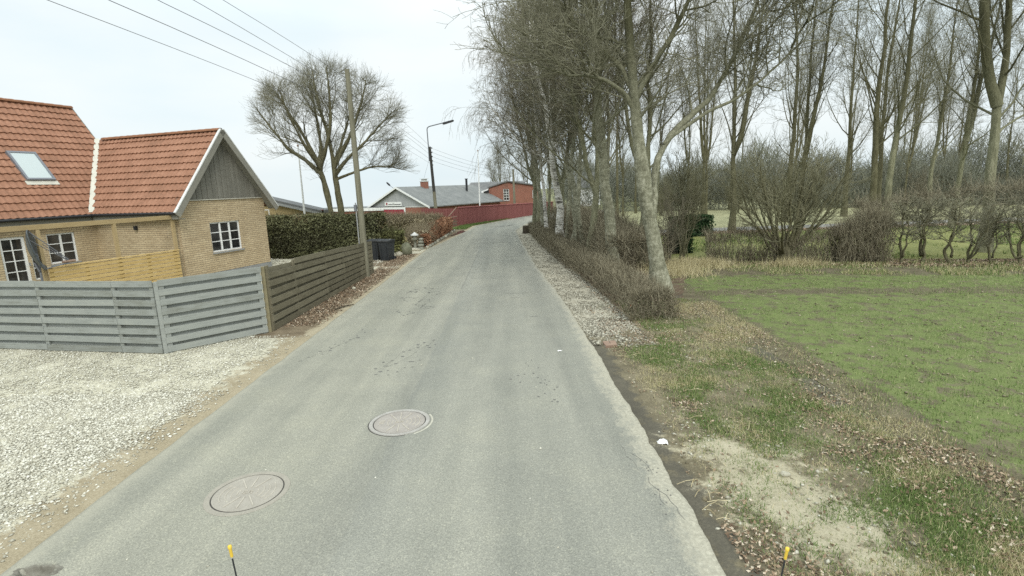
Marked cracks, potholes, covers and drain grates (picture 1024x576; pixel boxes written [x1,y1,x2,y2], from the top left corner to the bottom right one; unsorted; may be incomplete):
manhole cover [368,409,433,437]
manhole cover [203,471,290,516]
crack [624,449,682,516]
